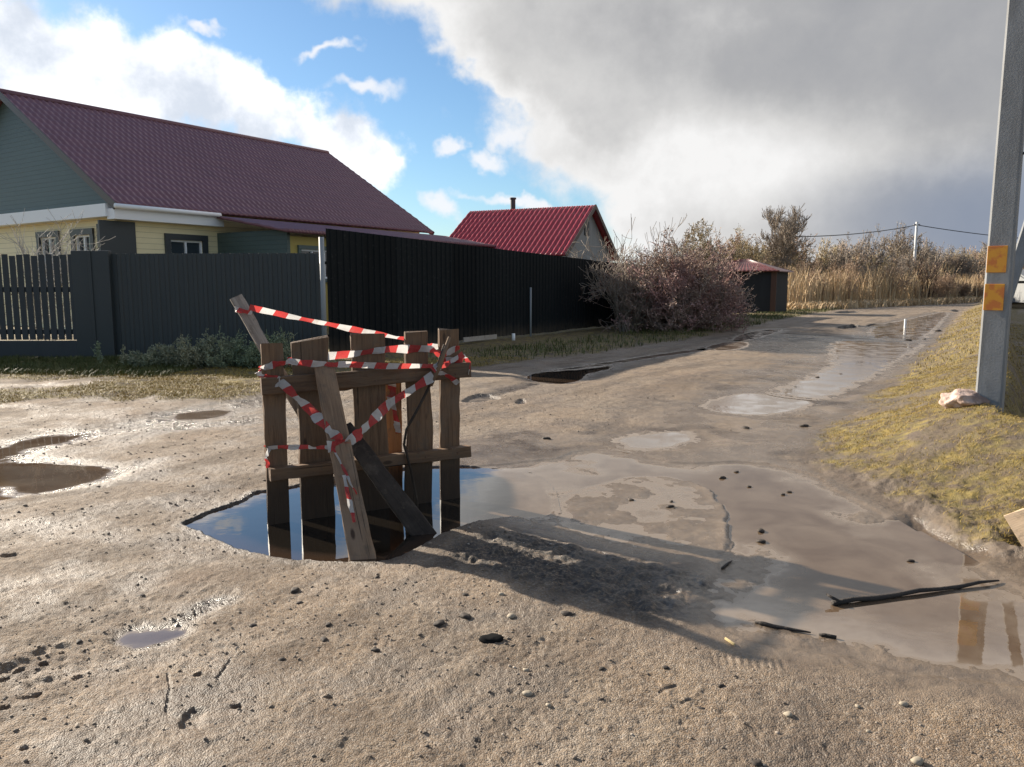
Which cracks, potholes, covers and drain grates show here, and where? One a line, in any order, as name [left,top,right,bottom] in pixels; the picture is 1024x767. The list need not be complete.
crack [164,672,173,713]
pothole [181,465,561,562]
pothole [0,459,116,494]
pothole [525,365,614,384]
crack [215,659,232,680]
